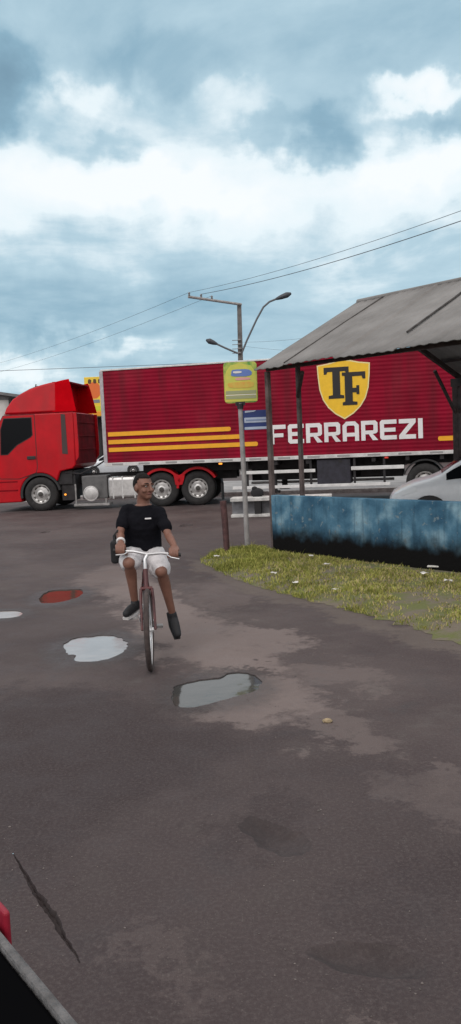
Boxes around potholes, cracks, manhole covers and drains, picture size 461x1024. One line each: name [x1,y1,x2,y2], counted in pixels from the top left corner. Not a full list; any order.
pothole [171,672,262,708]
pothole [39,589,83,603]
crack [13,854,81,963]
pothole [63,635,129,662]
